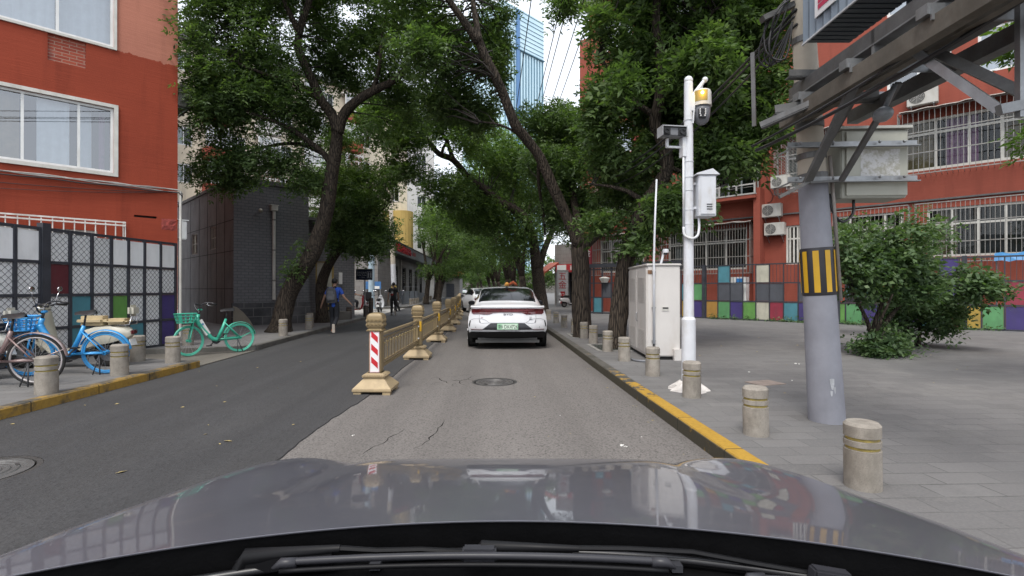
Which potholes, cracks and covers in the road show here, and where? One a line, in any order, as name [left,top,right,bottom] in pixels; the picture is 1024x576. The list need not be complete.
manhole cover [472,378,517,386]
manhole cover [0,456,44,481]
